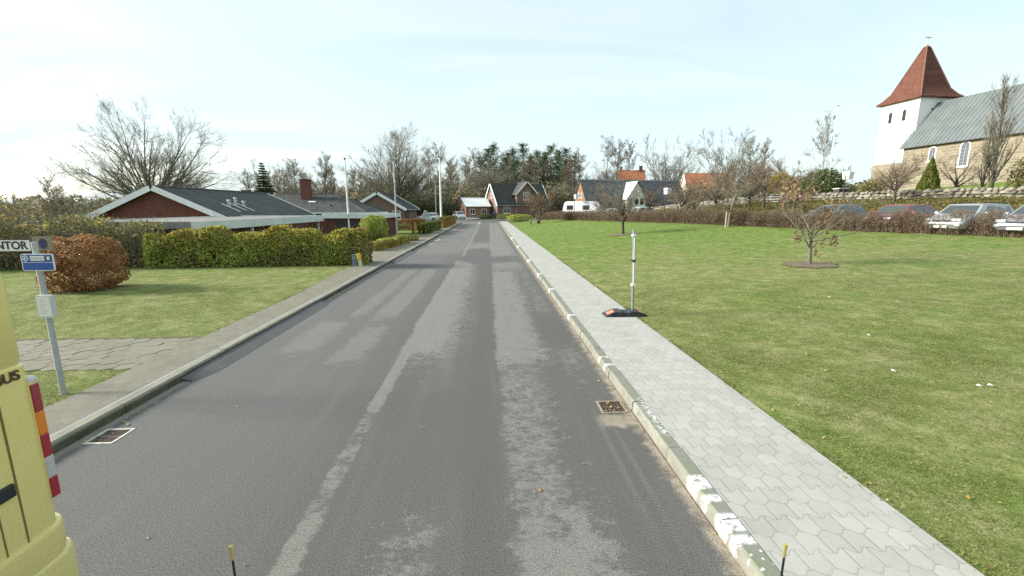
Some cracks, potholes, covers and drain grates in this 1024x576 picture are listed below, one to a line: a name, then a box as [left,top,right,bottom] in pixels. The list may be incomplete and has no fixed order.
drain grate [81,428,136,445]
drain grate [596,400,629,413]
